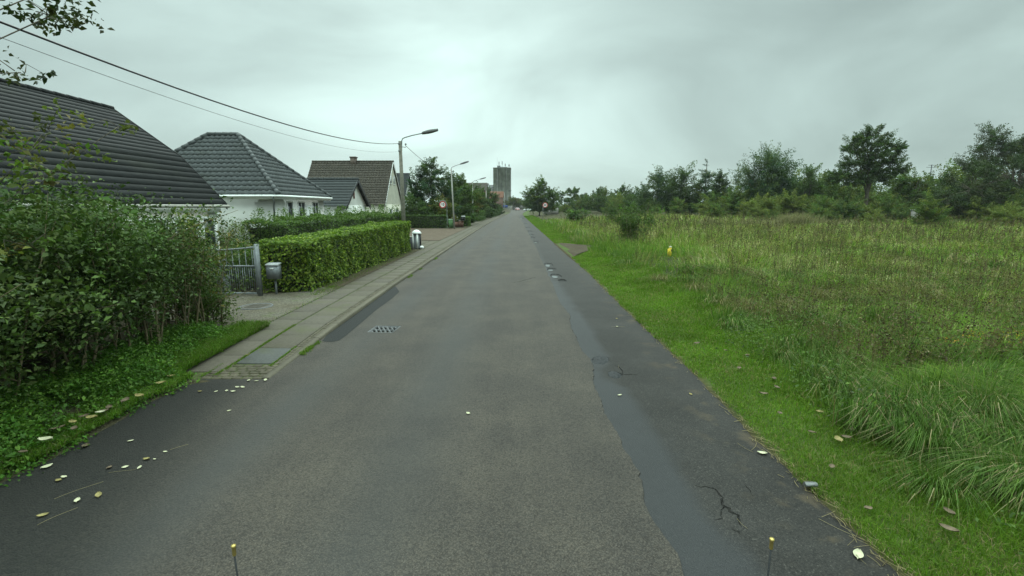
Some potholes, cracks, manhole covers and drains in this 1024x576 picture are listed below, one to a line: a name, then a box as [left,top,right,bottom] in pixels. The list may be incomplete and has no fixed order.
crack [698,484,753,534]
